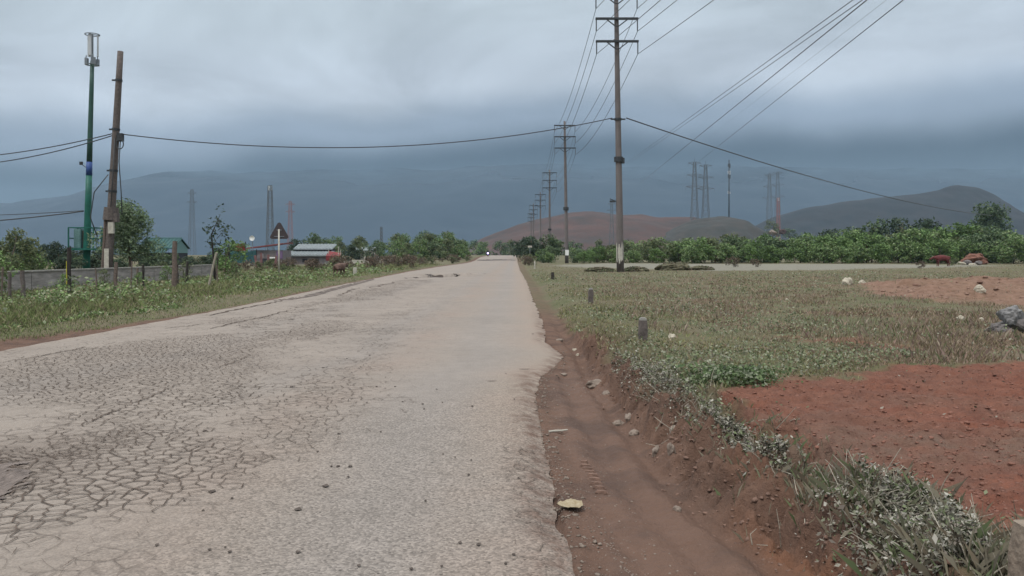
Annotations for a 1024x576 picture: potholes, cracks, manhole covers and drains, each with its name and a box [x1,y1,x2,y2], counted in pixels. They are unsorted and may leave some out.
crack [0,279,429,576]
pothole [0,459,43,499]
